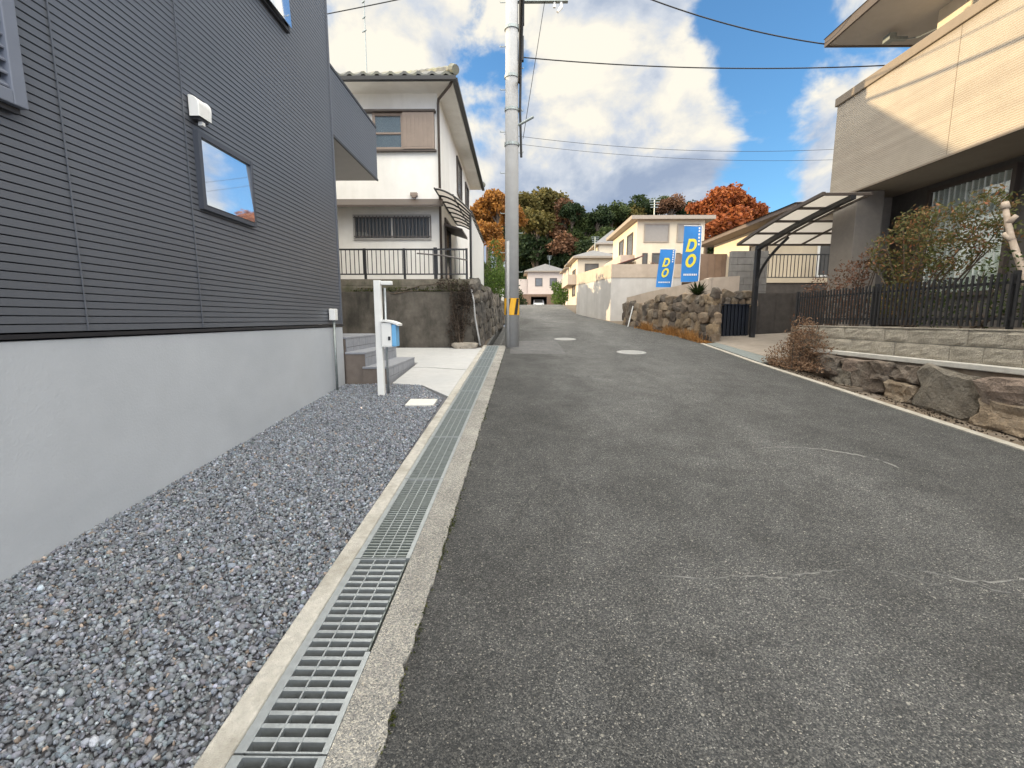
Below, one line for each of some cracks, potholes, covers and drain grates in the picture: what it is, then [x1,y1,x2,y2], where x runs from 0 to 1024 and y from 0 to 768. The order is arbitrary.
drain grate [431,410,472,437]
drain grate [447,391,480,410]
crack [763,447,910,474]
drain grate [355,479,443,565]
drain grate [234,559,407,756]
drain grate [225,755,327,768]
crack [657,569,845,579]
drain grate [468,366,491,377]
drain grate [475,358,494,366]
crack [882,566,1024,593]
drain grate [459,377,486,391]
drain grate [405,436,461,479]
